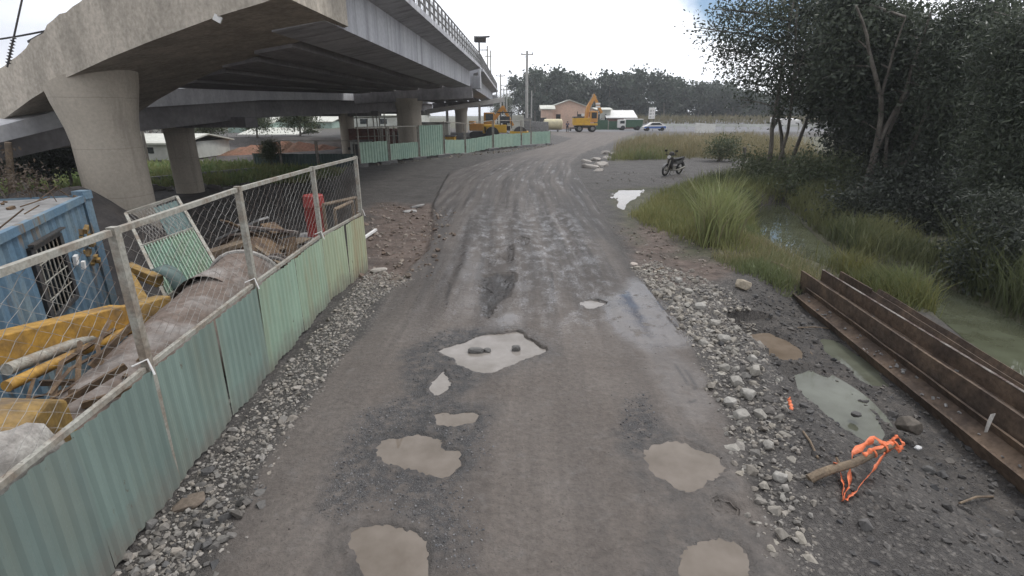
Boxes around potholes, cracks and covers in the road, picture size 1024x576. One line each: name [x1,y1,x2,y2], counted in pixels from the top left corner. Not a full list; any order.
pothole [669,528,767,576]
pothole [426,407,488,431]
pothole [422,367,458,399]
pothole [337,515,443,576]
pothole [634,434,738,500]
pothole [473,271,522,321]
pothole [577,297,612,310]
pothole [432,327,553,376]
pothole [365,427,473,485]
